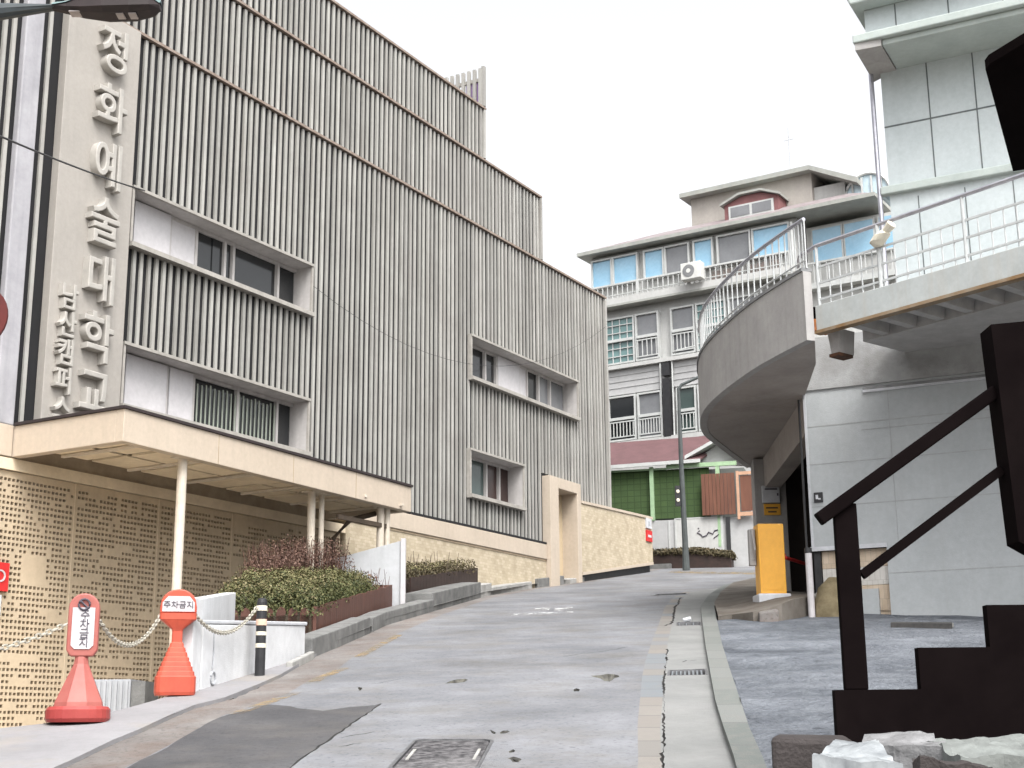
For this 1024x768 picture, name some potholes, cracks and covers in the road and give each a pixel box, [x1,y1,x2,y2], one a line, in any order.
manhole cover [388,739,494,768]
crack [665,598,681,626]
